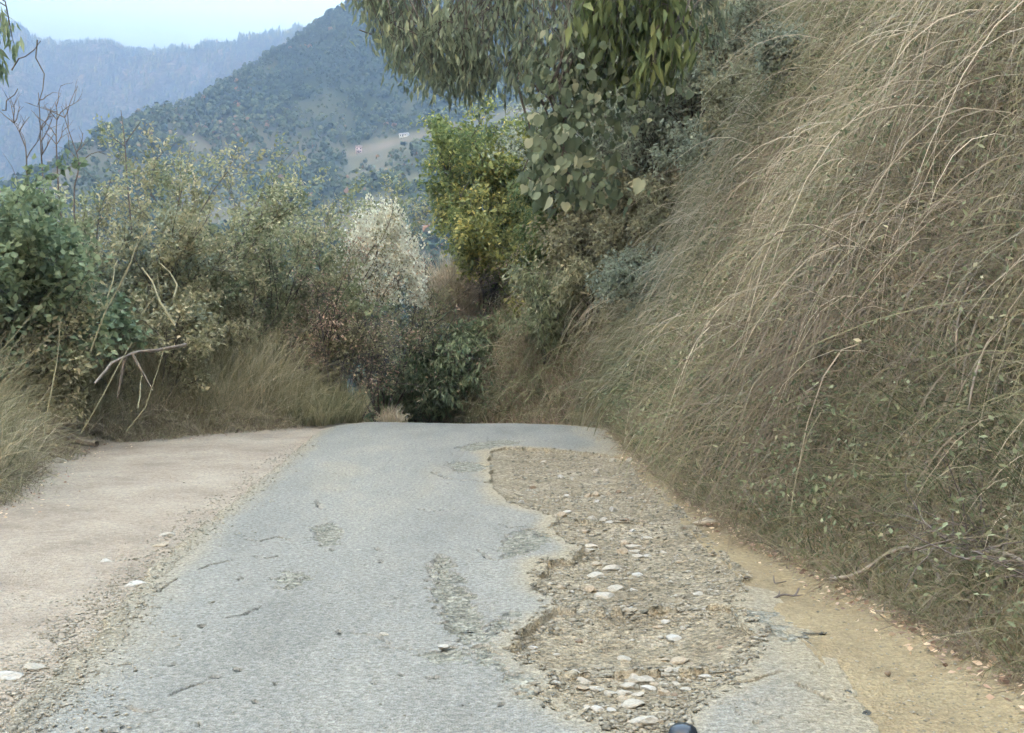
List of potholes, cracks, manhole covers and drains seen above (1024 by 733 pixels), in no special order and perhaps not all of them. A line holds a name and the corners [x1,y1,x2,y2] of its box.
pothole [481,448,693,525]
pothole [536,523,757,615]
pothole [496,530,553,559]
pothole [487,610,754,677]
pothole [429,556,499,650]
pothole [463,612,552,705]
pothole [526,671,737,733]
